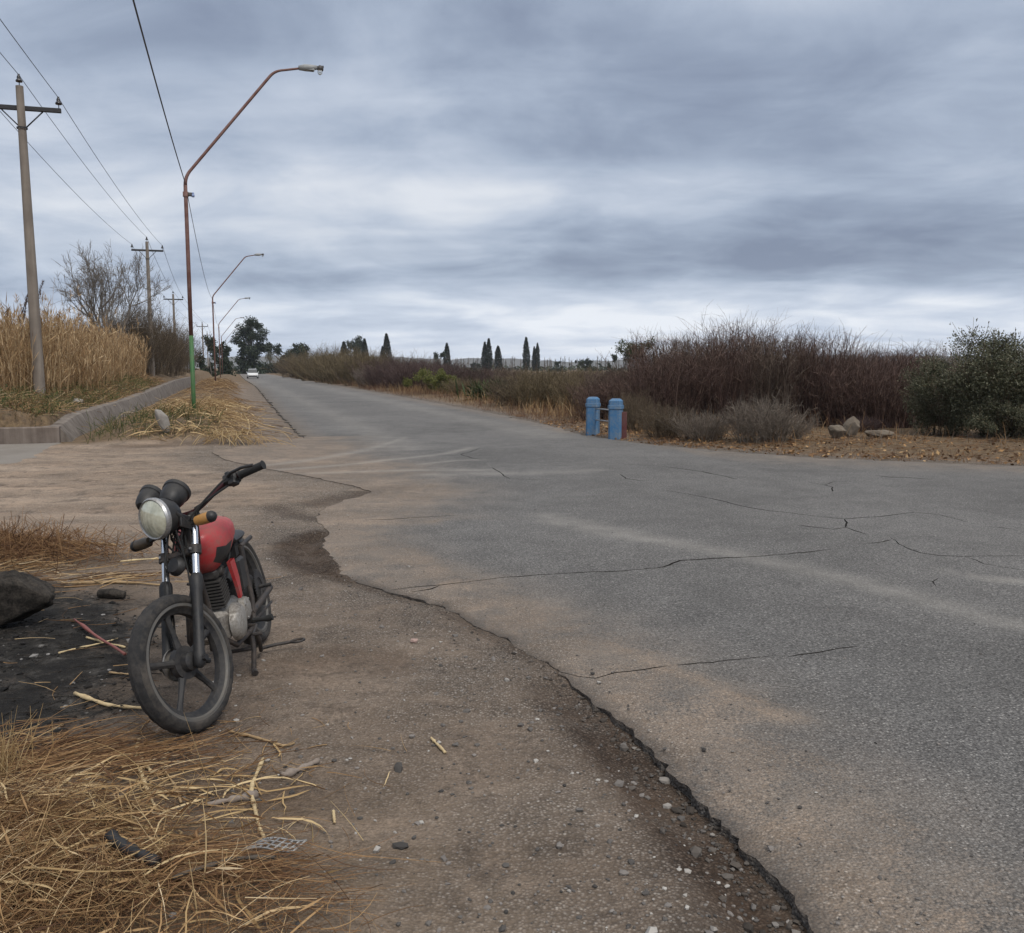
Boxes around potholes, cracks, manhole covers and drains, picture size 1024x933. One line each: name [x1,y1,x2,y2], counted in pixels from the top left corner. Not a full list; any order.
crack [559,646,857,679]
crack [875,537,1020,570]
crack [667,490,959,534]
crack [395,549,831,592]
